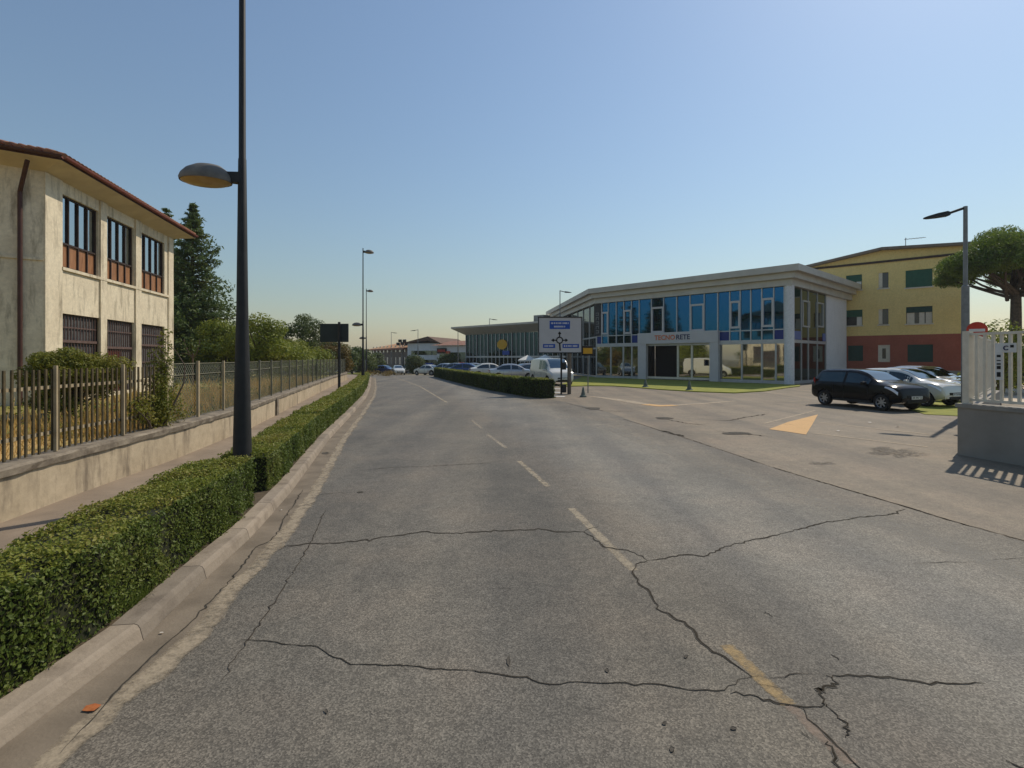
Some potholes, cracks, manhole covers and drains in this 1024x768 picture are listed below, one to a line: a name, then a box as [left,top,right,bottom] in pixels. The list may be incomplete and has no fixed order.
crack [221,492,985,768]
